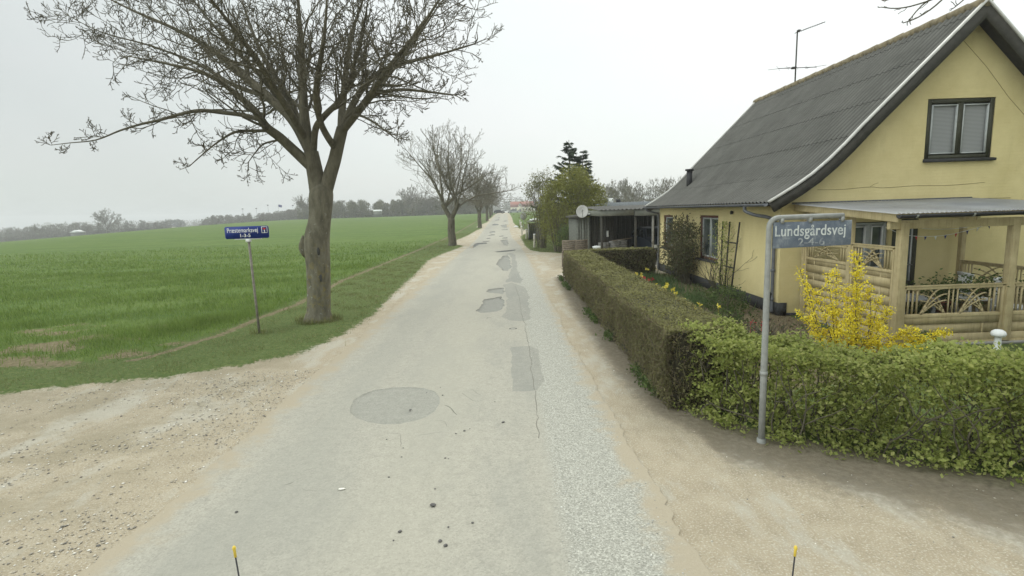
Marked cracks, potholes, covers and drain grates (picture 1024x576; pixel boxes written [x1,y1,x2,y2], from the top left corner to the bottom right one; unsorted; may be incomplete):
crack [395,389,480,446]
crack [515,286,540,438]
